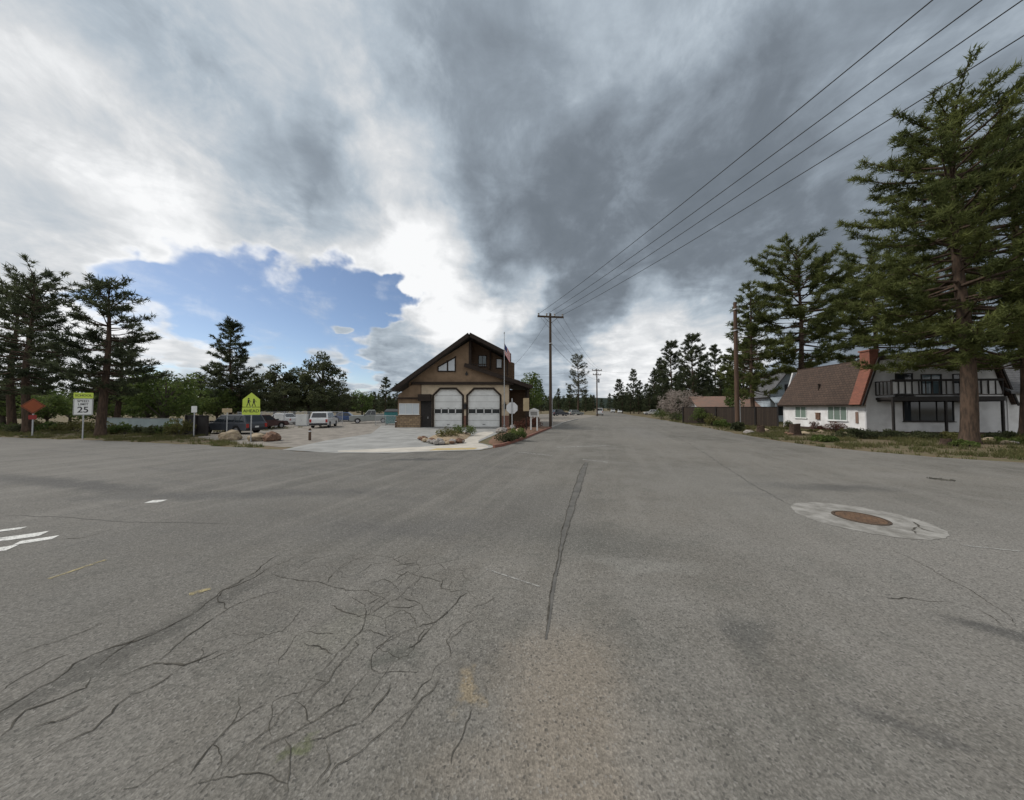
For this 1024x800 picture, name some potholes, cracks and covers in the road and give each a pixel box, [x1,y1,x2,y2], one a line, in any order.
crack [0,554,295,754]
crack [878,551,1016,625]
crack [125,555,492,789]
manhole cover [791,502,950,540]
crack [689,443,788,504]
